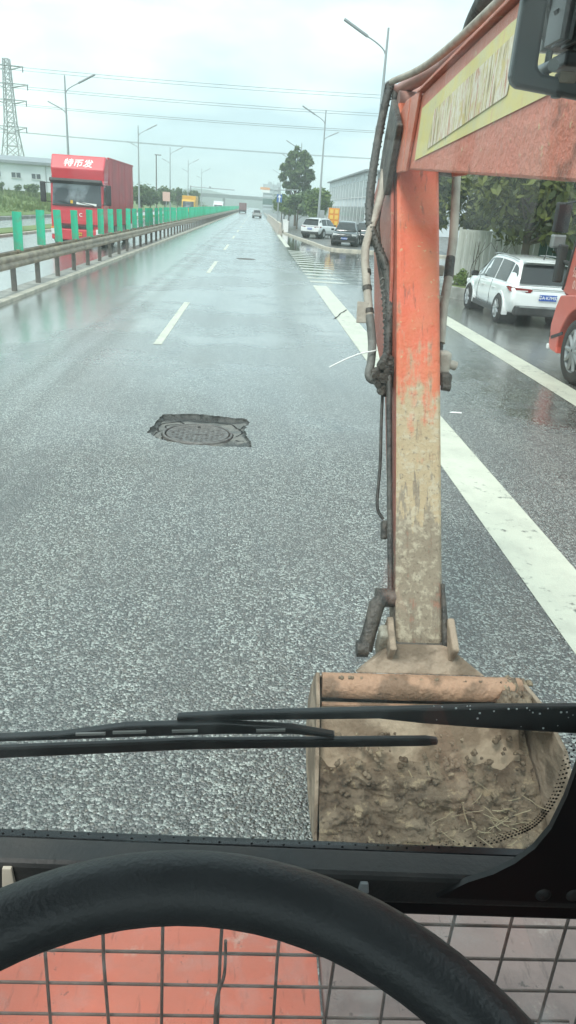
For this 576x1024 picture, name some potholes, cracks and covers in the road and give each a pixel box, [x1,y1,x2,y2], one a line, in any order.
manhole cover [162,423,233,446]
